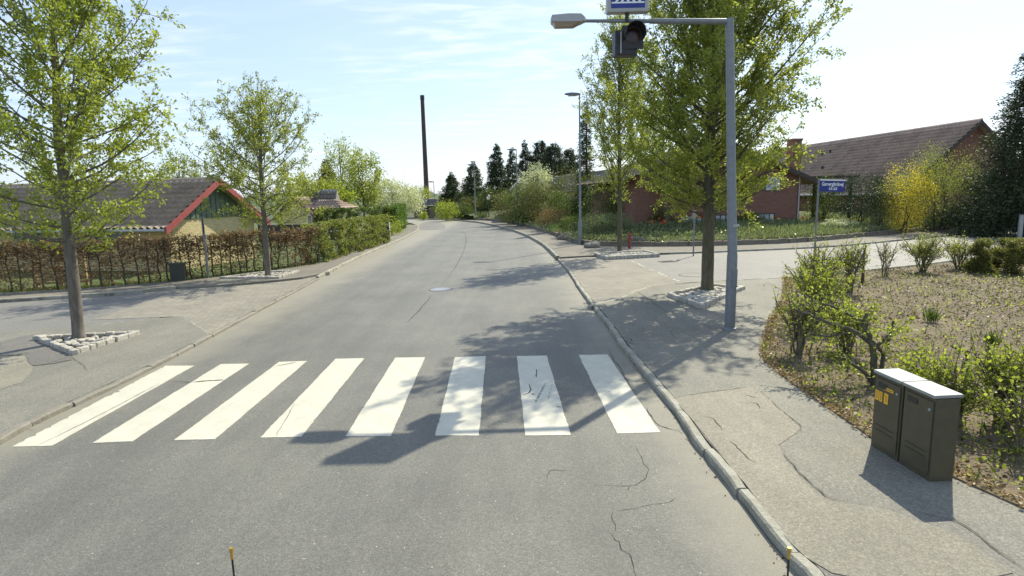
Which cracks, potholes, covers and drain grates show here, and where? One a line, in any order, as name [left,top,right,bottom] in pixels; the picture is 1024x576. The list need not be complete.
crack [676,387,802,462]
crack [596,451,675,575]
crack [783,453,841,501]
crack [920,511,1023,568]
